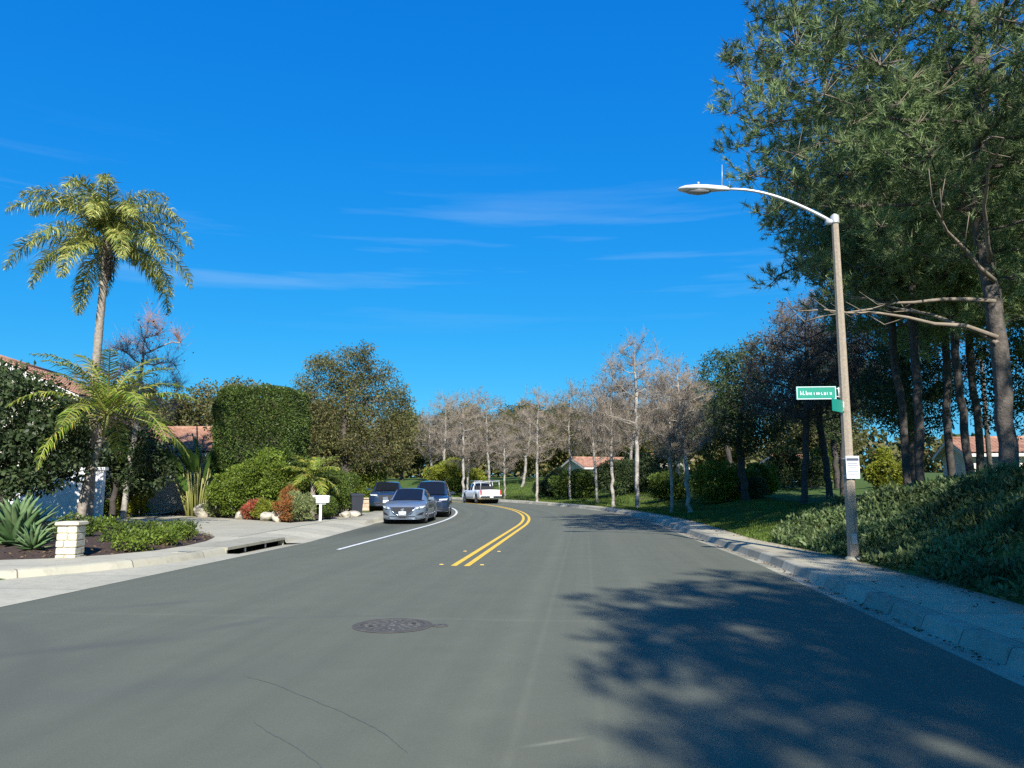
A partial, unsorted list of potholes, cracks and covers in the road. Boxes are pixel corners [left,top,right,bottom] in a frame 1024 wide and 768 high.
drain grate [189,537,285,554]
manhole cover [352,618,433,633]
crack [253,678,404,750]
crack [254,722,323,768]
